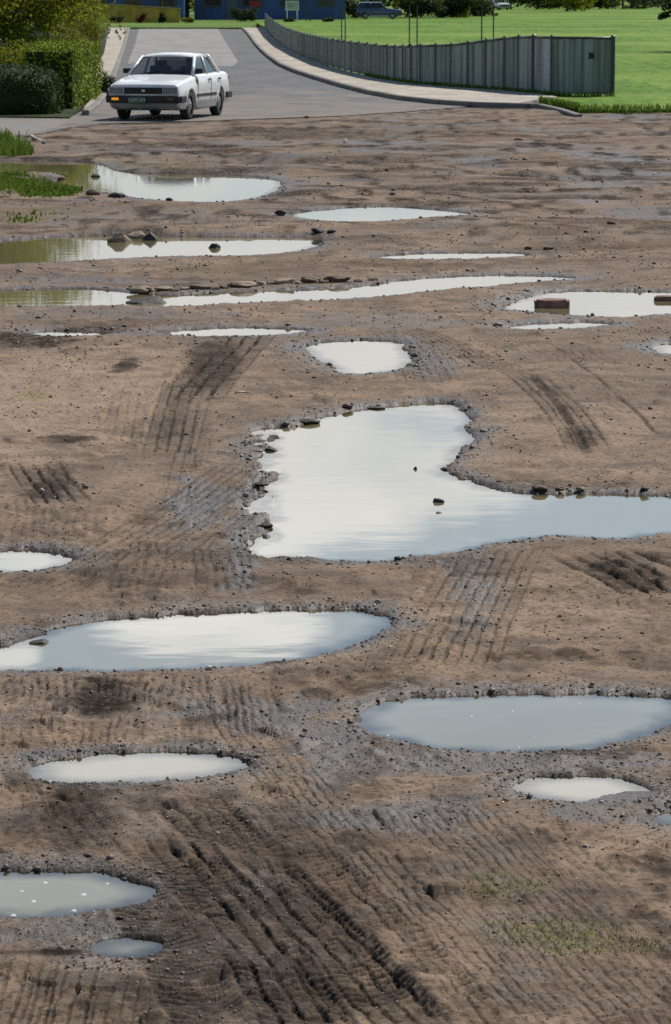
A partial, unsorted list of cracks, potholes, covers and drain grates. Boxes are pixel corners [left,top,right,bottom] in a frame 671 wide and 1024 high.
pothole [0,159,292,202]
pothole [284,205,480,222]
pothole [0,862,172,921]
pothole [10,745,265,785]
pothole [488,288,671,317]
pothole [292,337,421,375]
pothole [0,545,84,572]
pothole [364,250,542,259]
pothole [75,926,179,963]
pothole [146,325,324,337]
pothole [235,400,671,563]
pothole [345,686,671,754]
